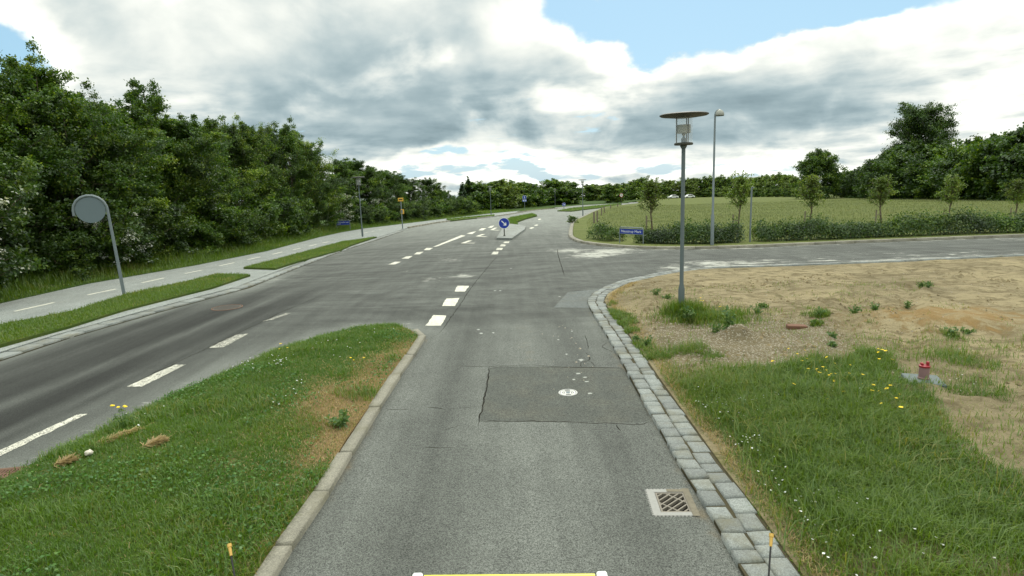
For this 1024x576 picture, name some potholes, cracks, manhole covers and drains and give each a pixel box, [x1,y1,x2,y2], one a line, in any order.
drain grate [645,488,700,517]
